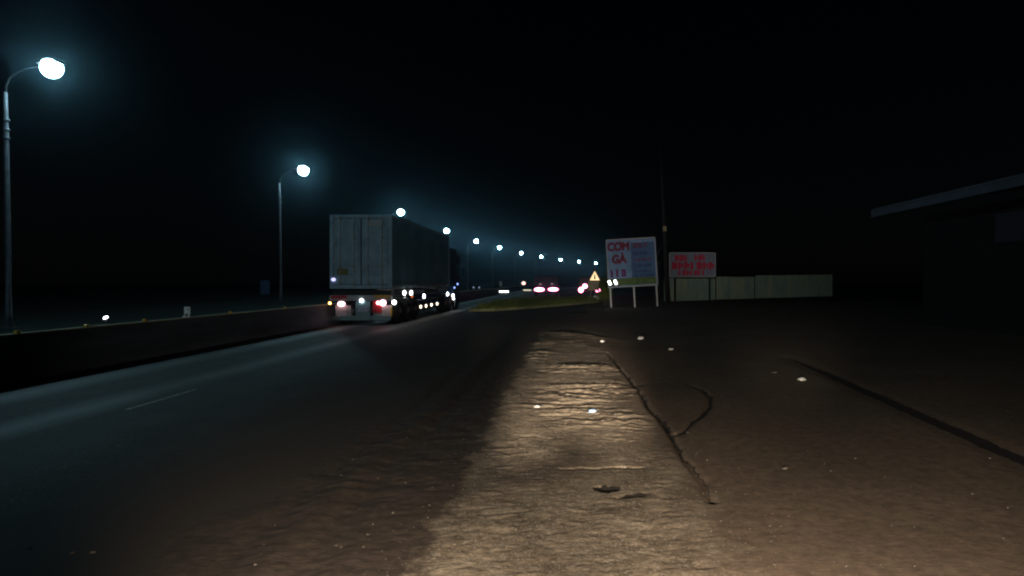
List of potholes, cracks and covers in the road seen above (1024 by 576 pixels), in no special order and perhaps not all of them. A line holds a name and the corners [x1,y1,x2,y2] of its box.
crack [583,354,714,503]
pothole [593,485,620,493]
